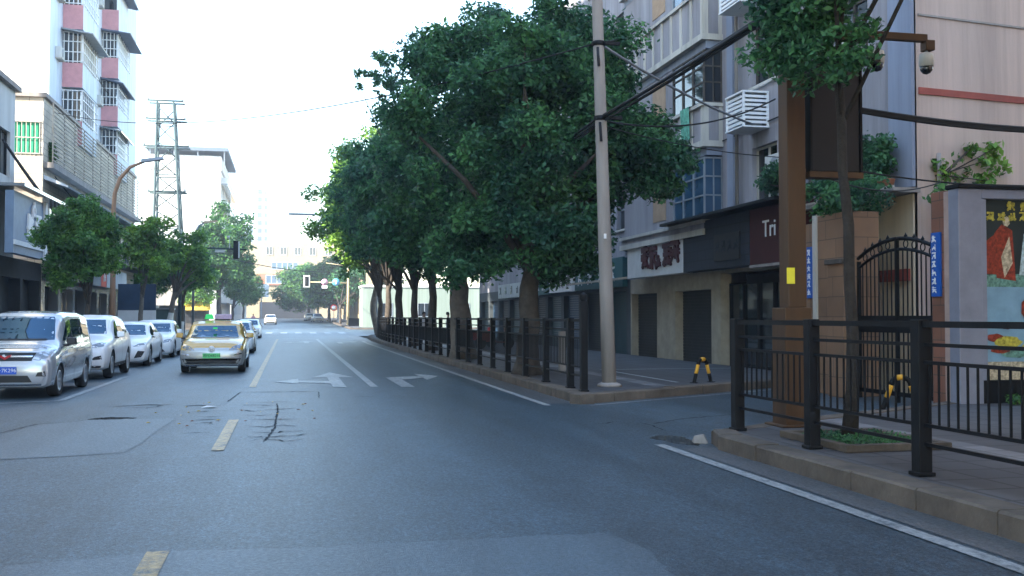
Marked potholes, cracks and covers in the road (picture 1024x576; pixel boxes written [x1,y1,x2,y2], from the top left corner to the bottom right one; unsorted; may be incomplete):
pothole [650,435,700,446]
crack [239,402,302,441]
